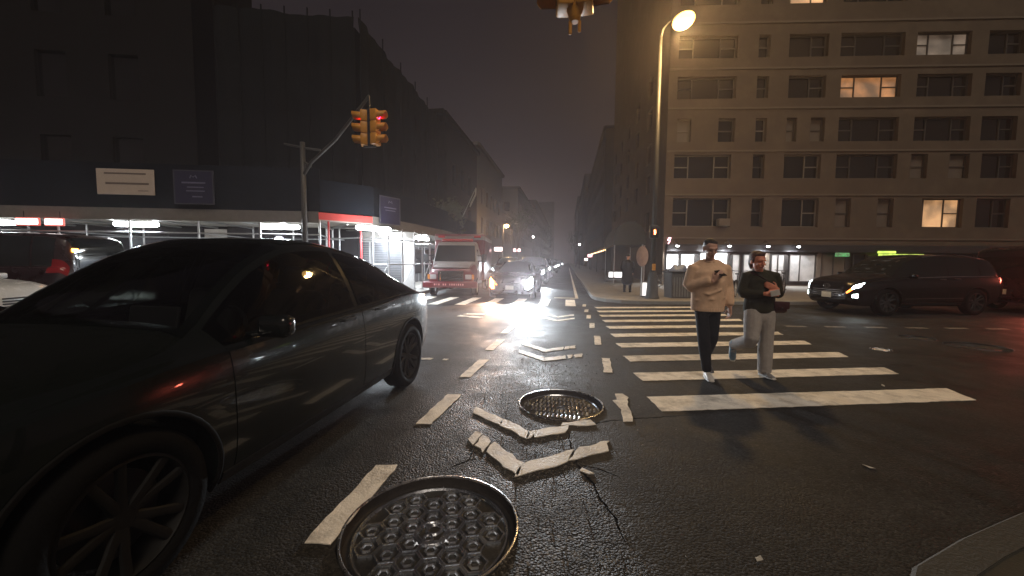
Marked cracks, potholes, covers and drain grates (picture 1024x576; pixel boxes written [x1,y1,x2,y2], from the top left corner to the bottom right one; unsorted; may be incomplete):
manhole cover [519,389,604,421]
crack [568,436,620,532]
manhole cover [942,341,1015,352]
manhole cover [337,475,519,576]
